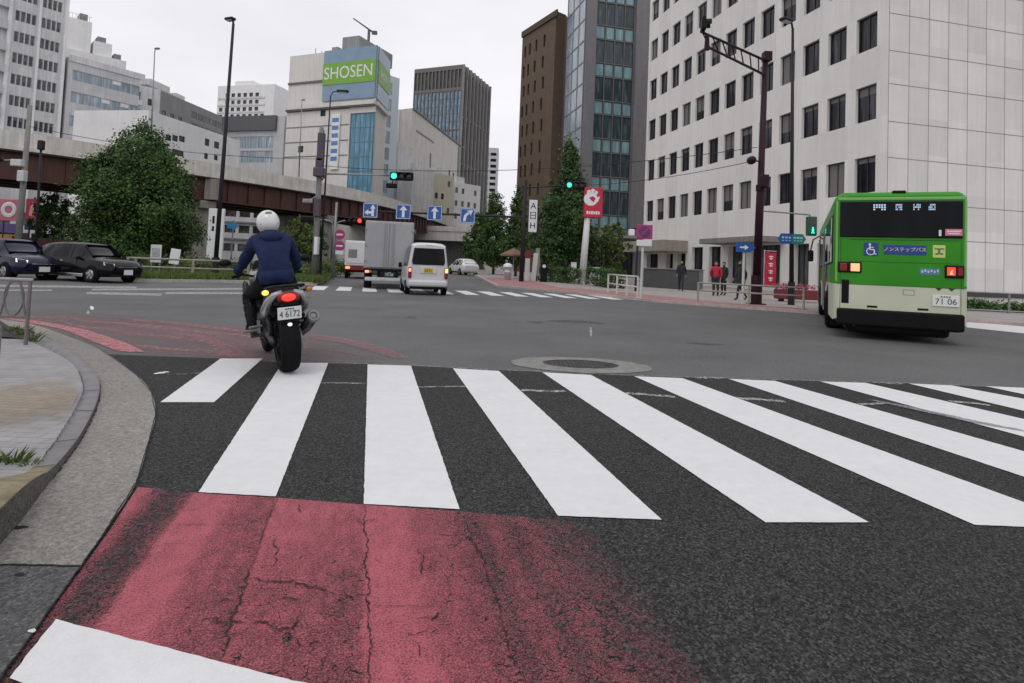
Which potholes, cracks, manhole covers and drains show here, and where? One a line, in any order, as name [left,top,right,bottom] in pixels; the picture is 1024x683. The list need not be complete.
manhole cover [511,357,652,373]
crack [213,507,439,683]
crack [465,521,515,666]
